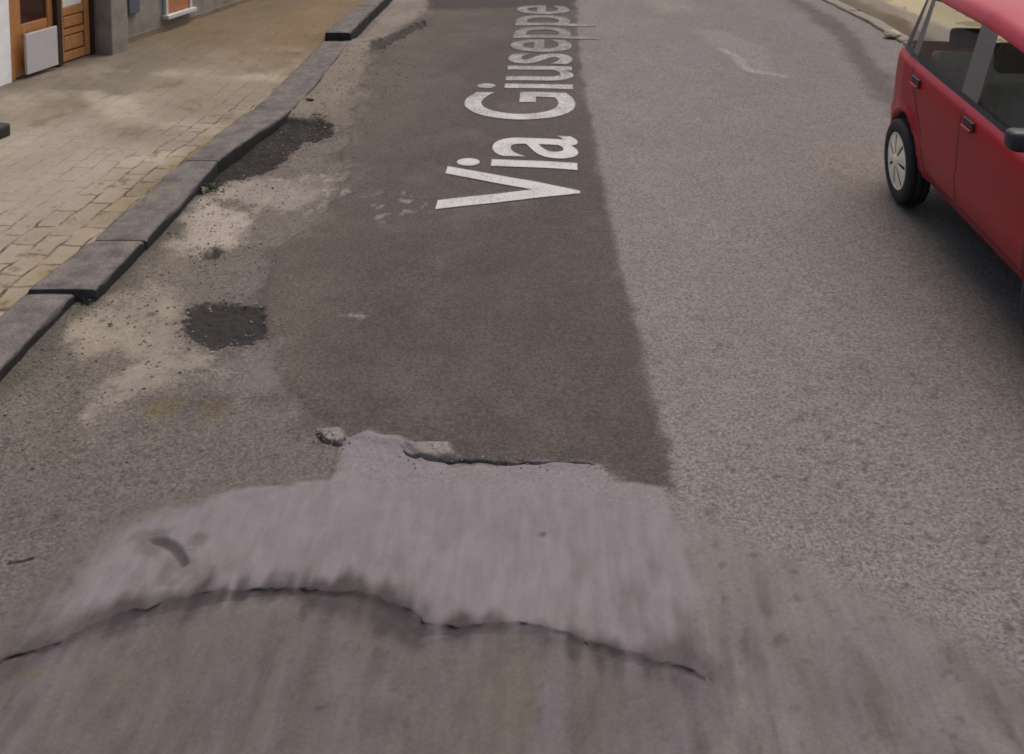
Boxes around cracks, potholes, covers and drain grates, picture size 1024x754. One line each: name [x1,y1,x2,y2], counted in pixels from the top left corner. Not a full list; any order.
crack [392,440,607,471]
crack [0,547,717,694]
